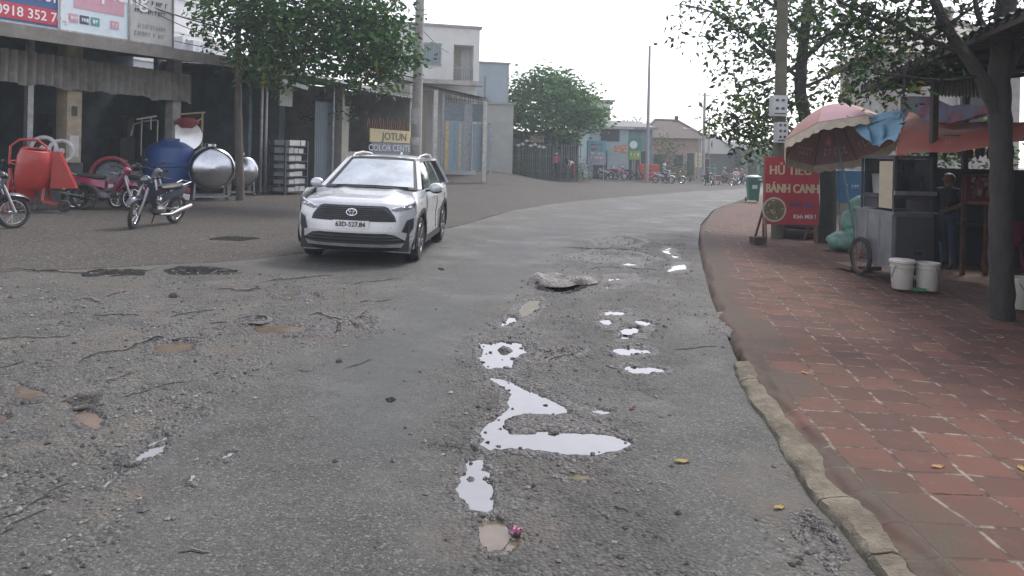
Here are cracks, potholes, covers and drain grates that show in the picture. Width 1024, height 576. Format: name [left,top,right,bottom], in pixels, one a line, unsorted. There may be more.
pothole [597,308,633,317]
crack [308,277,400,320]
pothole [787,508,853,574]
pothole [211,316,369,339]
pothole [470,333,550,375]
pothole [0,379,58,405]
pothole [142,337,209,357]
pothole [491,295,546,331]
pothole [592,315,658,344]
pothole [66,404,109,431]
pothole [469,514,525,560]
